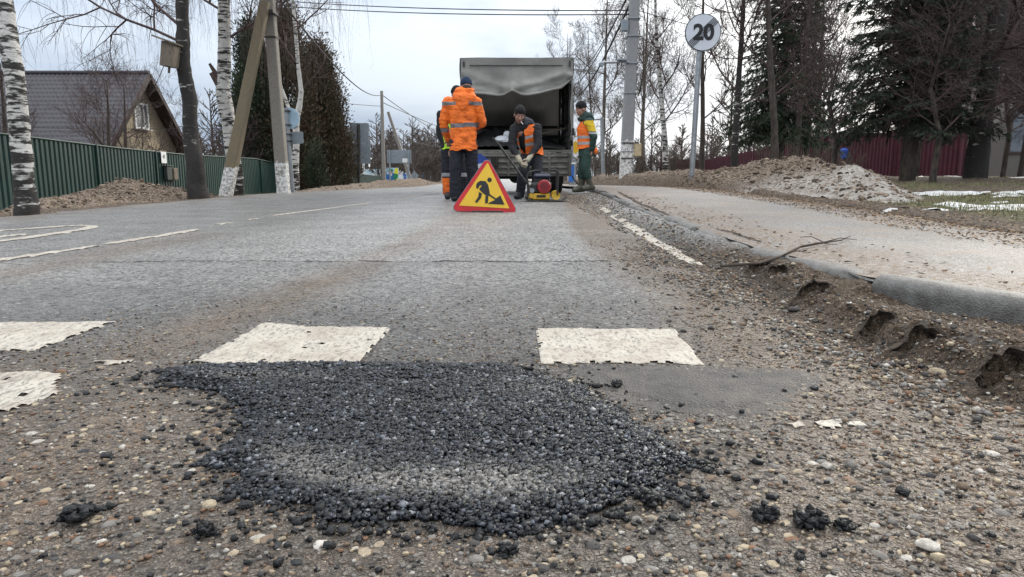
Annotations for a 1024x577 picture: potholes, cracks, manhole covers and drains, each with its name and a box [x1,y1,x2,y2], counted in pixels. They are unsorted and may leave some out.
pothole [787,279,834,307]
pothole [849,308,899,347]
pothole [962,345,1024,398]
pothole [878,325,963,359]
